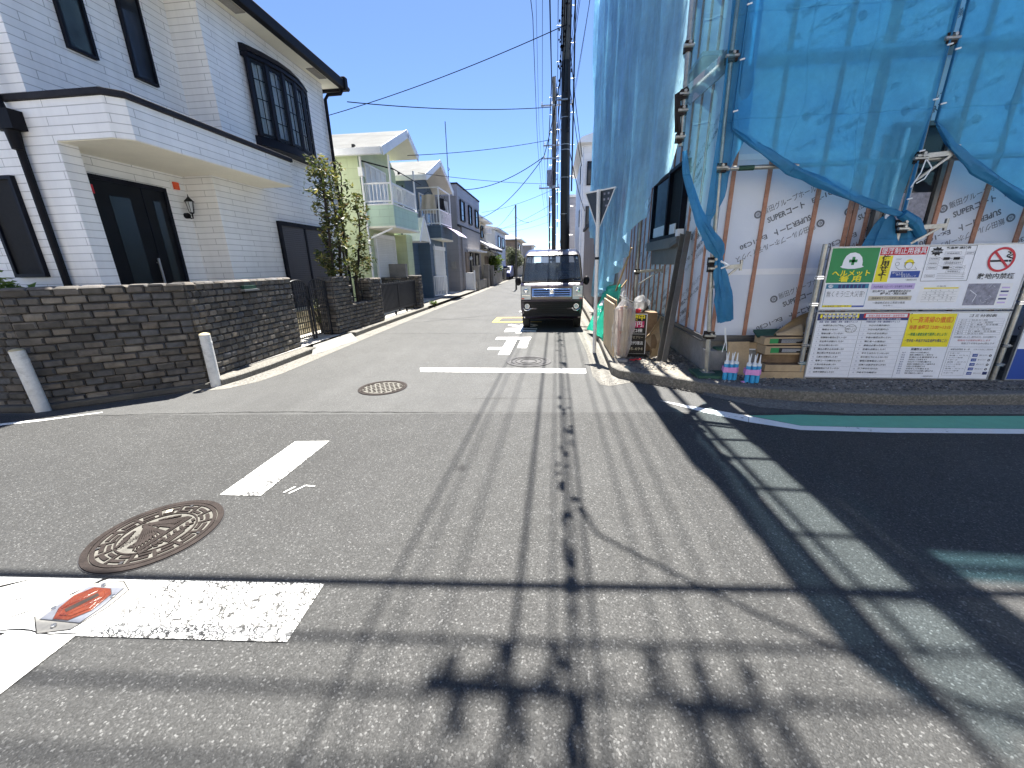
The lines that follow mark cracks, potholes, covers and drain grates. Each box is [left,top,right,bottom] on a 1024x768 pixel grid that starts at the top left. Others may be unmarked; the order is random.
manhole cover [506,356,551,367]
manhole cover [358,381,408,396]
manhole cover [77,500,225,575]
